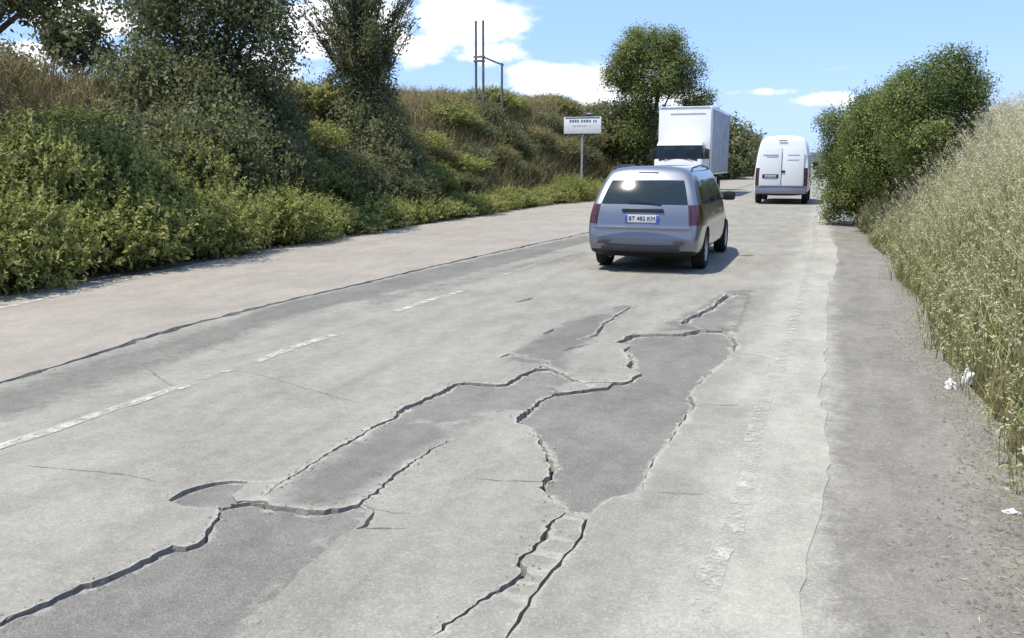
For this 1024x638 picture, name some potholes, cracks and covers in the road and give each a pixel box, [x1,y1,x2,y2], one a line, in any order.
pothole [172,483,246,508]
crack [0,185,775,638]
